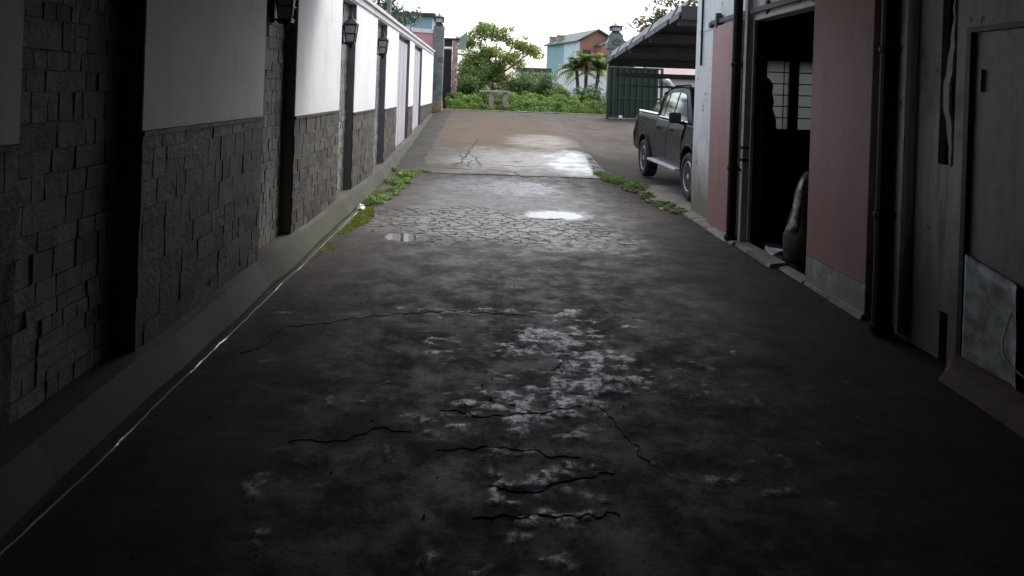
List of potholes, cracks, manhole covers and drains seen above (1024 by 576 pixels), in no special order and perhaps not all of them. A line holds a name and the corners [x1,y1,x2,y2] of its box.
crack [489,472,615,493]
crack [472,511,620,519]
crack [447,446,579,458]
crack [441,405,580,418]
crack [287,427,410,443]
crack [446,140,524,170]
crack [240,309,525,353]
crack [600,408,651,462]
